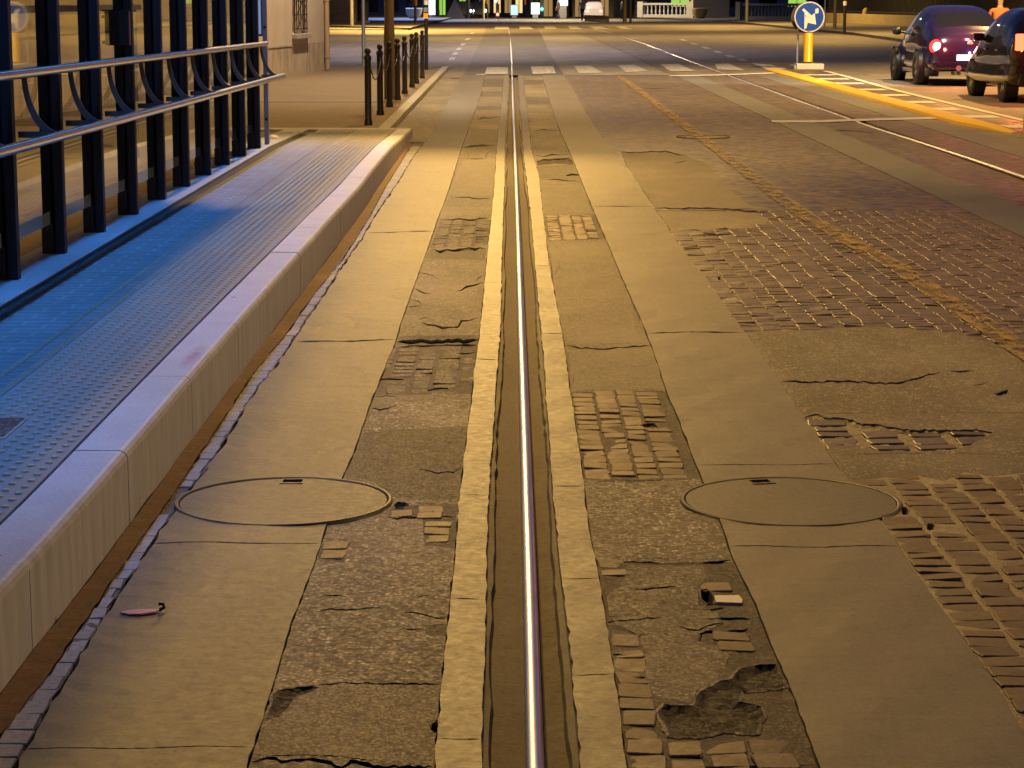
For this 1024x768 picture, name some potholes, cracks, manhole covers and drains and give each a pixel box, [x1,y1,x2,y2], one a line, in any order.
crack [253,754,432,768]
crack [784,371,969,385]
manhole cover [680,476,902,526]
manhole cover [174,476,392,526]
pothole [655,664,789,739]
pothole [804,415,991,453]
crack [464,144,495,159]
crack [316,595,382,612]
crack [401,594,449,630]
crack [397,272,478,354]
